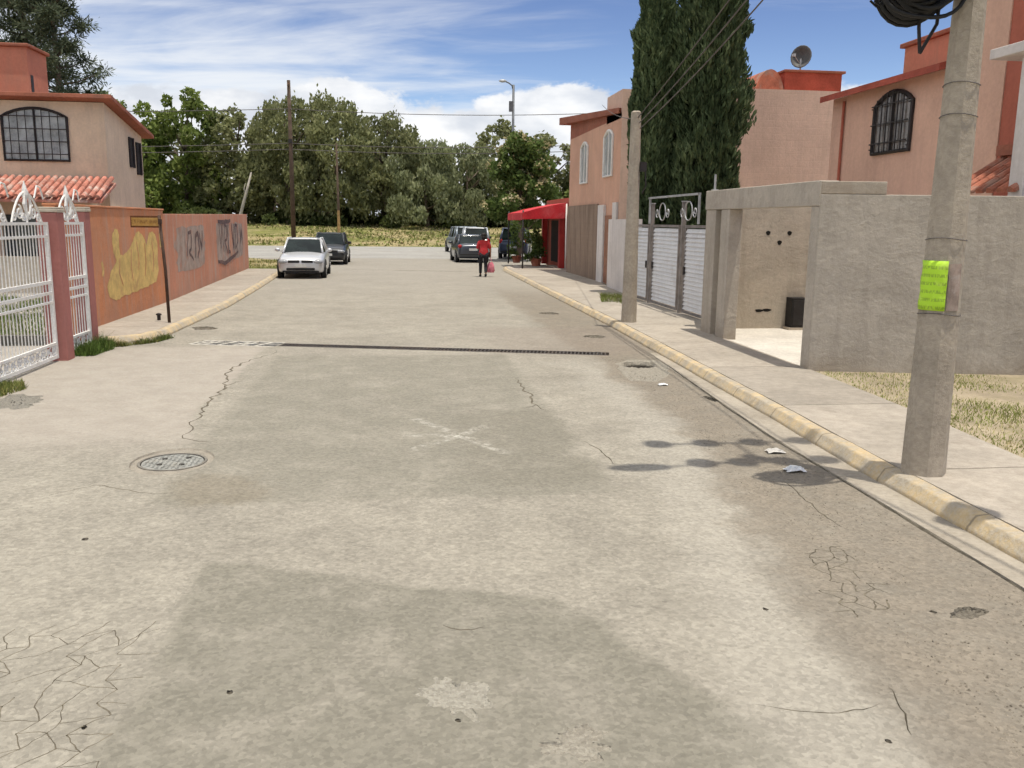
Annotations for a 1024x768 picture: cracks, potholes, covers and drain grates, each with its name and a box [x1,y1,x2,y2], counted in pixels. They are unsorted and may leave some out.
crack [757,687,911,734]
crack [0,621,160,768]
pothole [950,607,989,619]
crack [182,351,277,442]
crack [804,546,890,617]
crack [517,380,544,410]
drain grate [279,343,609,355]
manhole cover [129,448,214,475]
crack [783,481,840,526]
crack [52,485,166,495]
